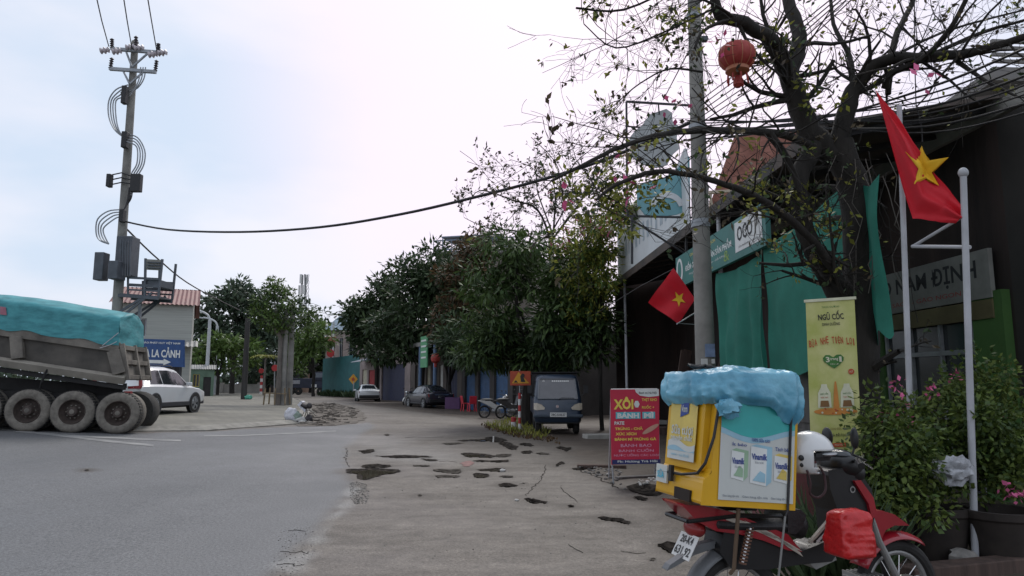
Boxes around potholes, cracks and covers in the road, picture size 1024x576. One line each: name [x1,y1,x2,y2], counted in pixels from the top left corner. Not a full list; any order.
pothole [598,516,631,524]
pothole [627,483,662,496]
pothole [346,468,401,480]
